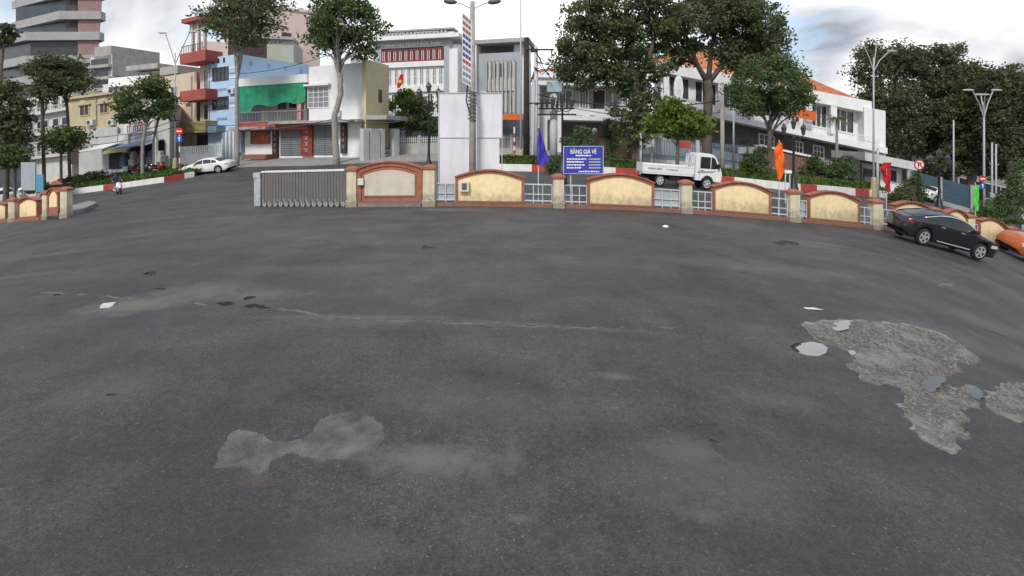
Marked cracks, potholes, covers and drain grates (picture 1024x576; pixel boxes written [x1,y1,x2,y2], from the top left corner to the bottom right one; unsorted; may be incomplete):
pothole [790,341,828,356]
